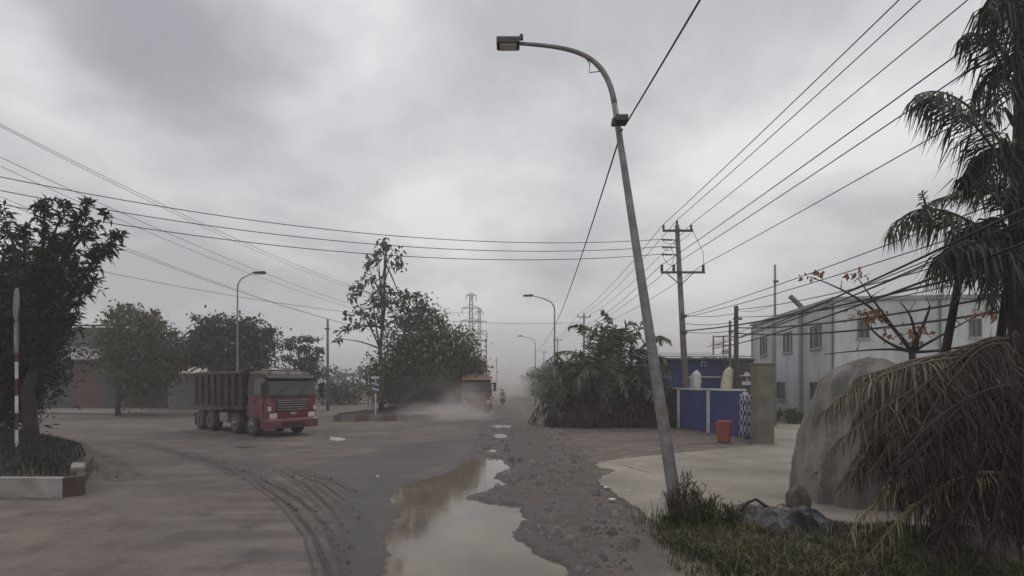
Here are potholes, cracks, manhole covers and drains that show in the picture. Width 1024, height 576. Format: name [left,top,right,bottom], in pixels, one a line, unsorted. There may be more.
pothole [366,455,590,576]
